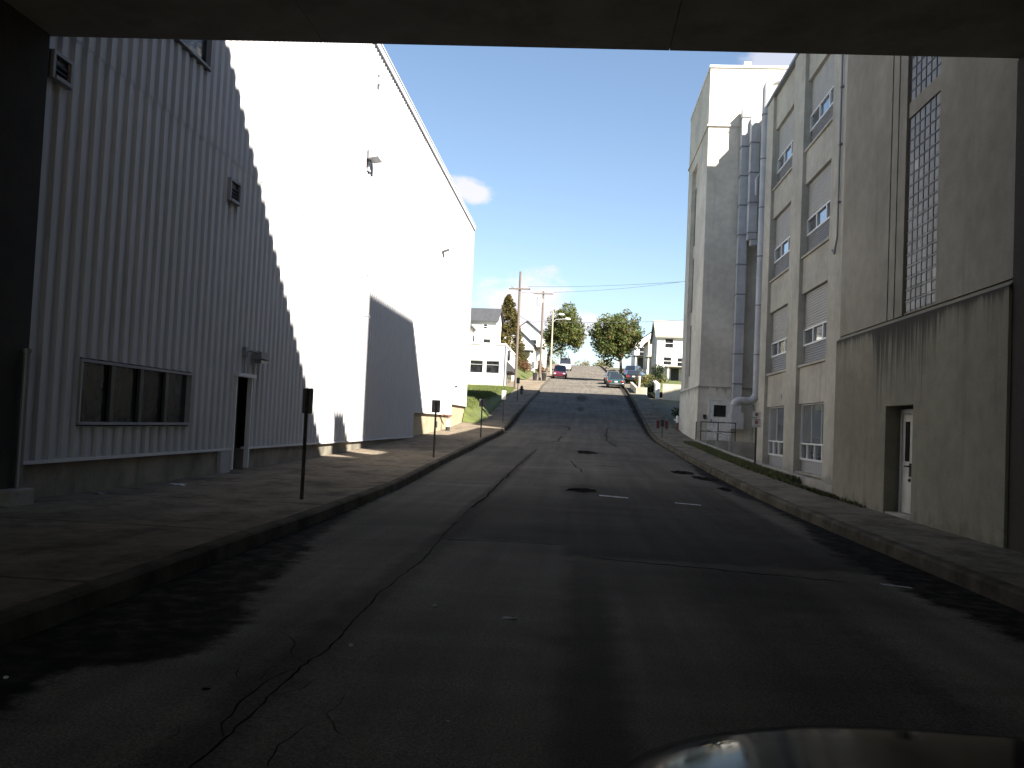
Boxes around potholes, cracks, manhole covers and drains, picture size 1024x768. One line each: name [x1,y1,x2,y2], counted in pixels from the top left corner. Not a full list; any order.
crack [267,693,346,766]
